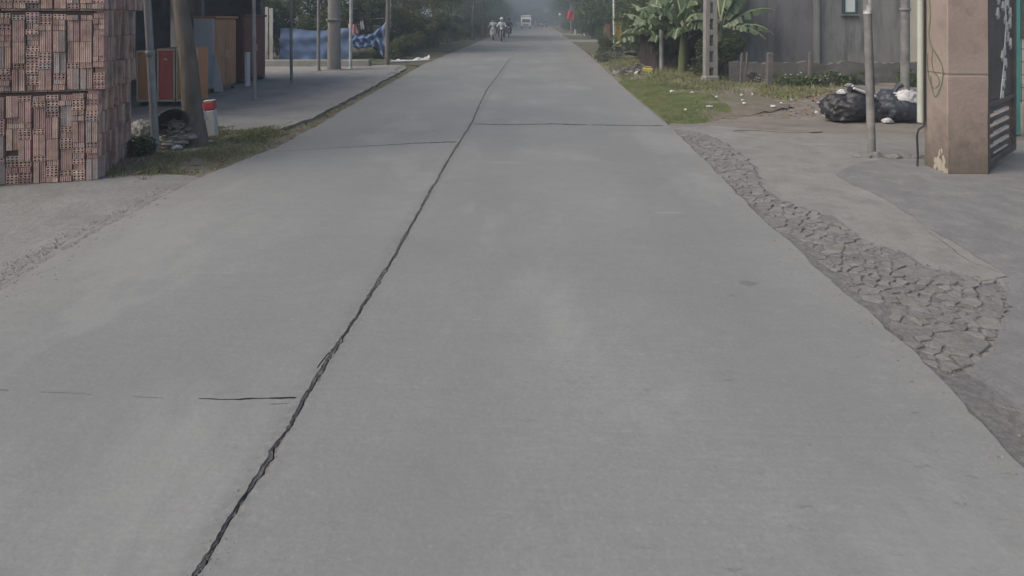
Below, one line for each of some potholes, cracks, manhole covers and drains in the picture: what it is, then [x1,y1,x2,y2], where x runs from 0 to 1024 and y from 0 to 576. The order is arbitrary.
crack [4,60,663,576]
crack [674,130,1024,467]
